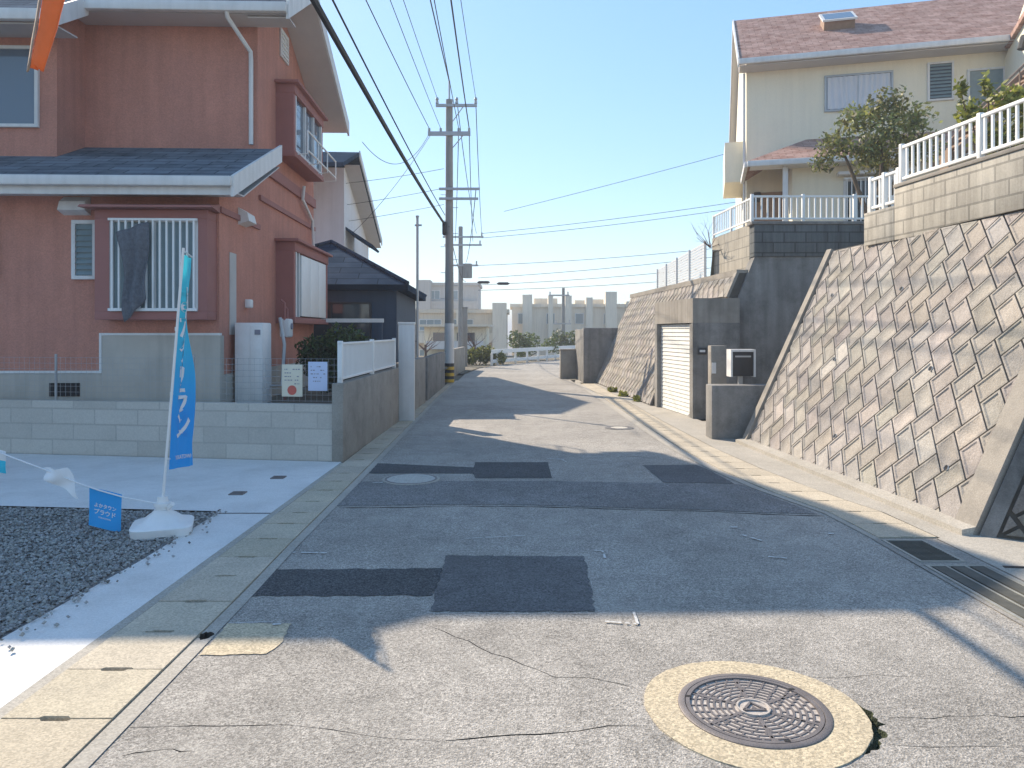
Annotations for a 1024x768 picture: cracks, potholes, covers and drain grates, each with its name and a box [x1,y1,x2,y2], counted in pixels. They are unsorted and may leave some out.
drain grate [924,565,1024,622]
manhole cover [382,473,440,485]
crack [127,724,619,742]
drain grate [881,539,966,562]
manhole cover [644,661,873,768]
crack [394,620,631,687]
